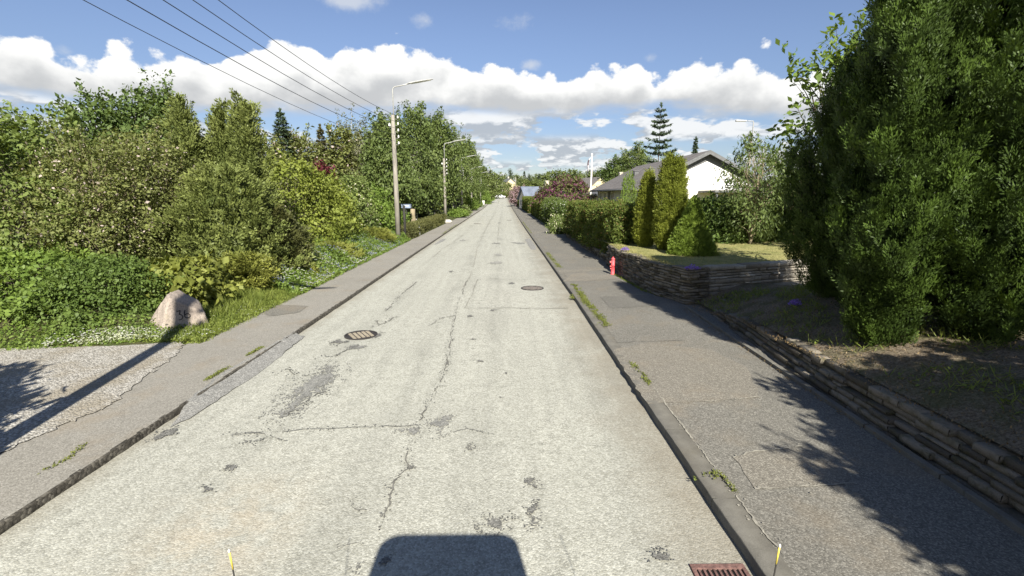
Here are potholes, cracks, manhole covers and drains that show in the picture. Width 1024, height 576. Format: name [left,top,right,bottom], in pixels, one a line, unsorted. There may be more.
drain grate [689,563,751,576]
manhole cover [344,330,378,340]
crack [226,282,493,548]
